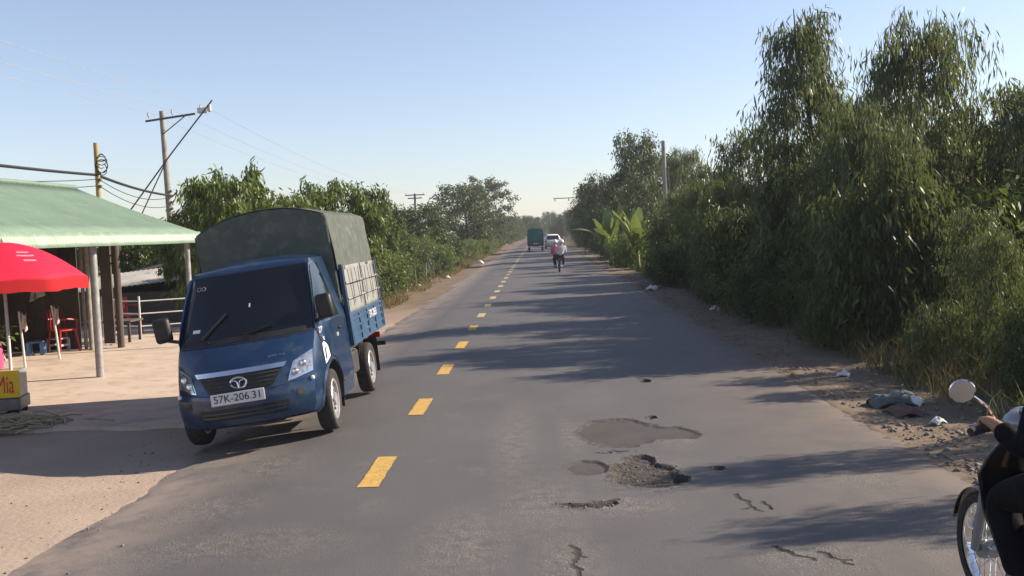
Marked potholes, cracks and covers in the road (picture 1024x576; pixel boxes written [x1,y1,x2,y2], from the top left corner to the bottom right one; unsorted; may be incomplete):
crack [733,493,773,512]
crack [771,546,854,566]
pothole [572,418,704,454]
pothole [562,460,612,476]
pothole [553,497,627,509]
pothole [606,454,684,488]
crack [568,545,587,576]
pothole [668,474,692,485]
